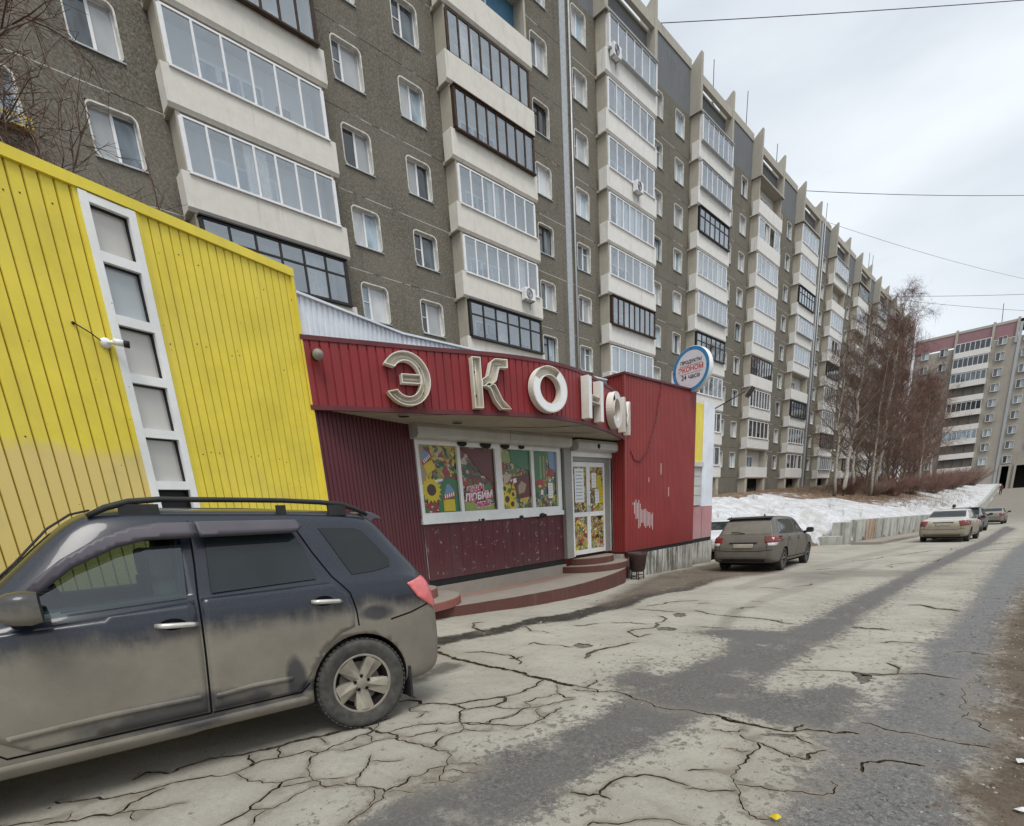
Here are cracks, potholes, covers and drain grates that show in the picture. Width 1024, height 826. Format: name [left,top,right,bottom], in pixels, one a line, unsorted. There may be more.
crack [9,587,990,826]
pothole [853,672,872,684]
